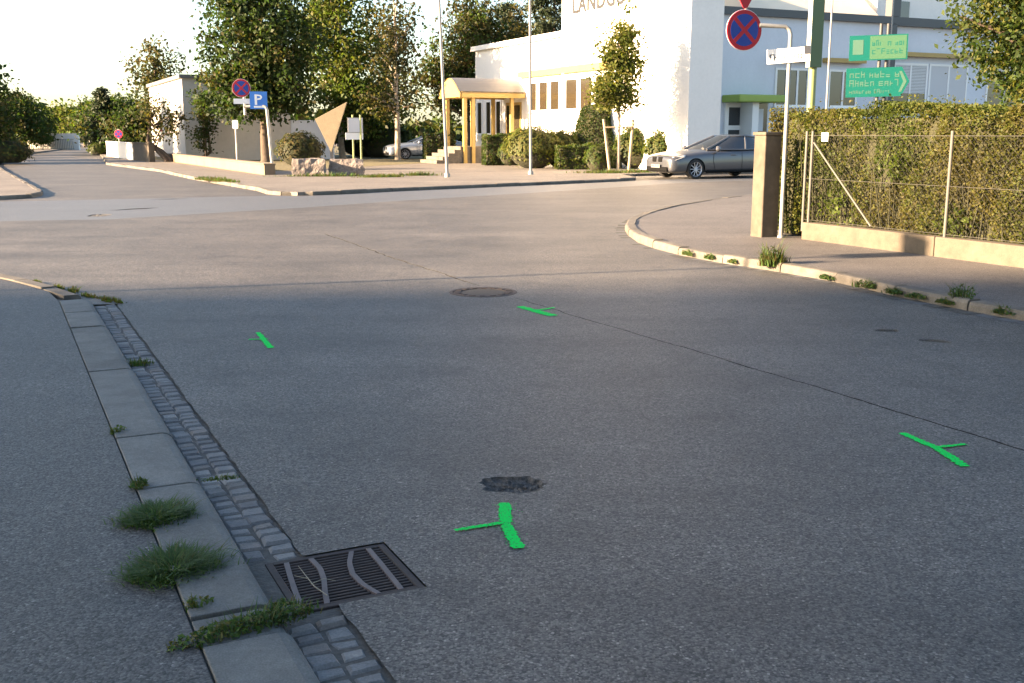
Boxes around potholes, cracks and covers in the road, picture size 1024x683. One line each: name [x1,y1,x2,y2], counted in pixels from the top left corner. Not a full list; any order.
crack [326,234,479,286]
manhole cover [449,287,517,297]
pothole [478,476,547,493]
drain grate [265,543,425,616]
